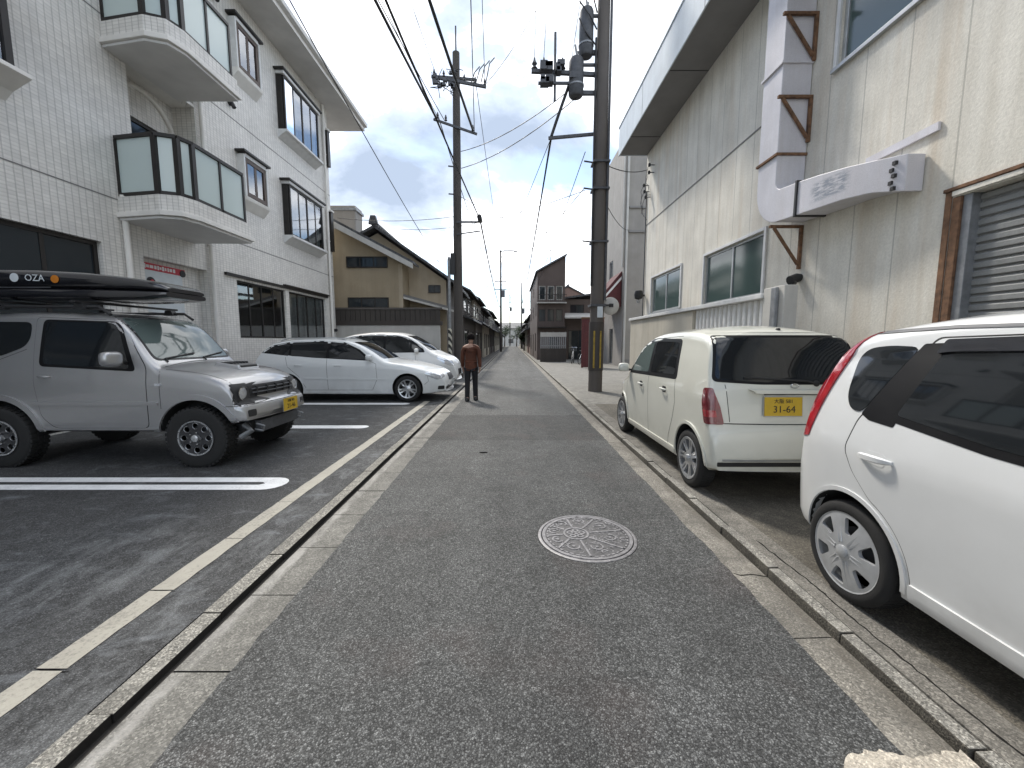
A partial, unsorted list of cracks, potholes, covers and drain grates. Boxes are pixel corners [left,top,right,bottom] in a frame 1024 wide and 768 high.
manhole cover [538,515,638,563]
